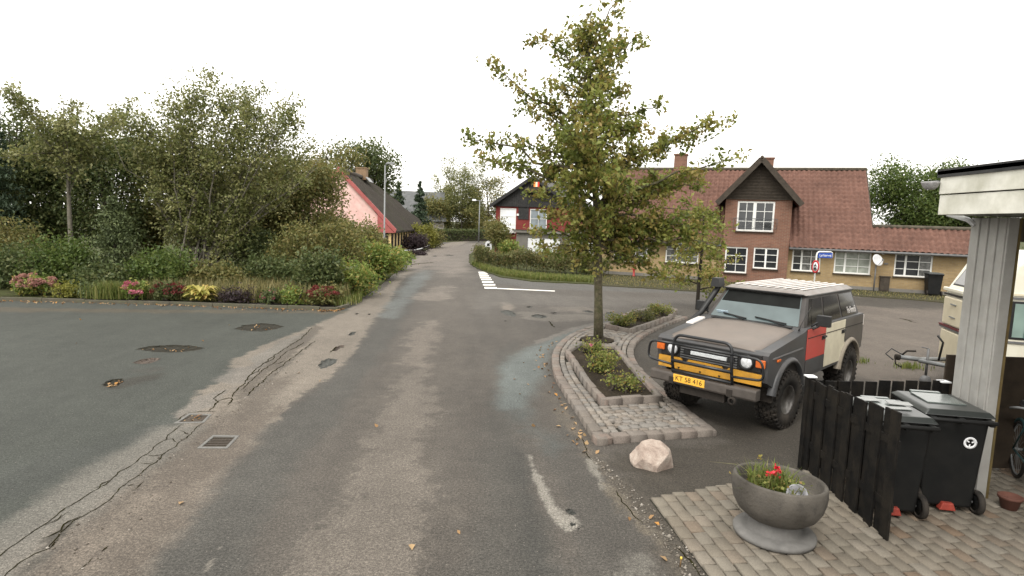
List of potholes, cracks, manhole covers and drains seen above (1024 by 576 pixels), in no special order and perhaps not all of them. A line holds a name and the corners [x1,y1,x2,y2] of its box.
crack [578,434,643,524]
pothole [97,378,128,389]
crack [0,328,315,576]
drain grate [175,413,212,424]
drain grate [197,435,239,449]
pothole [313,357,341,370]
